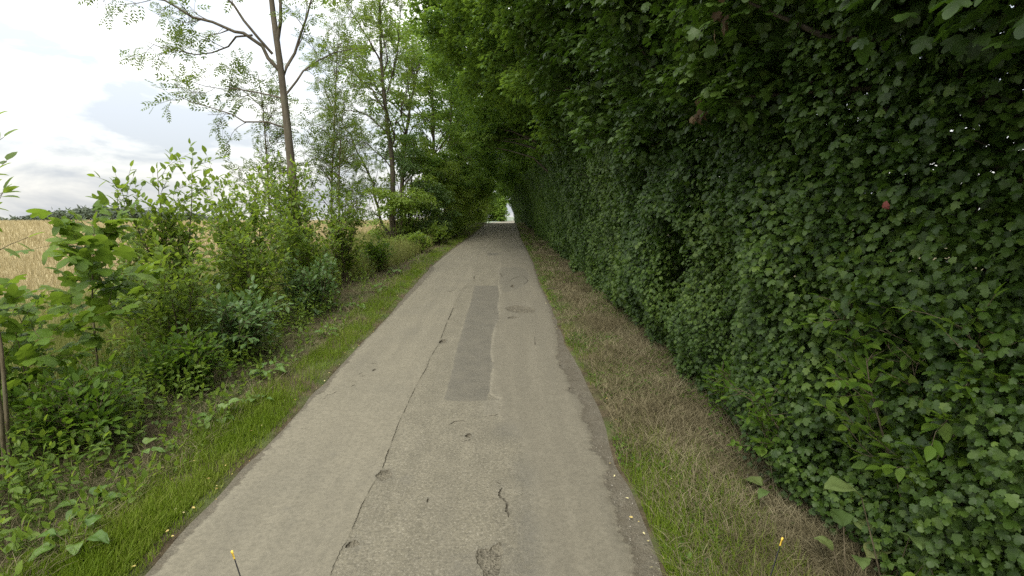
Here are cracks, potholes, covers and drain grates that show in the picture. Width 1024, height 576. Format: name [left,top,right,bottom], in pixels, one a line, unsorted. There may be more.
crack [331,309,453,575]
pothole [375,469,392,481]
crack [495,481,510,518]
pothole [475,542,504,576]
